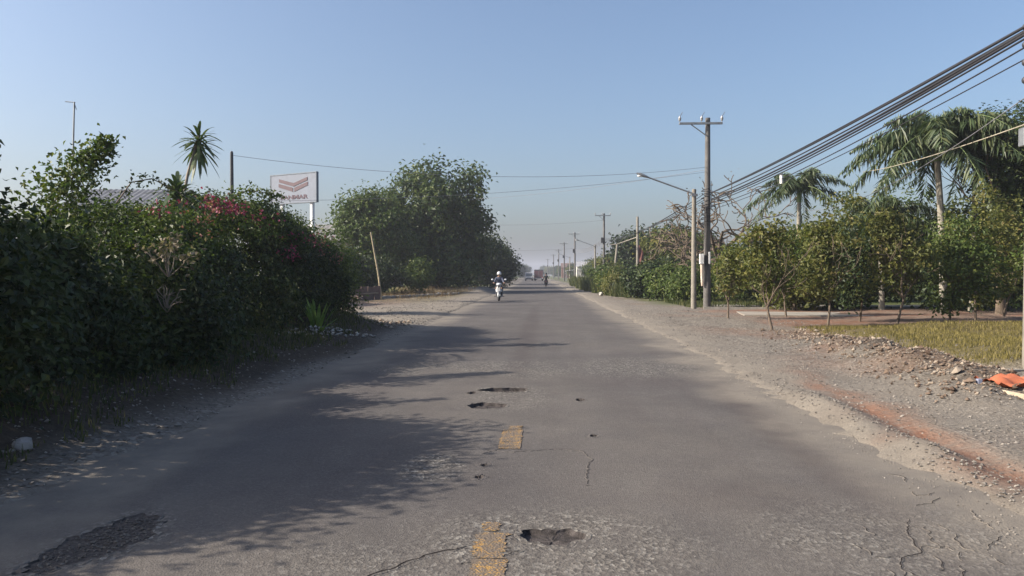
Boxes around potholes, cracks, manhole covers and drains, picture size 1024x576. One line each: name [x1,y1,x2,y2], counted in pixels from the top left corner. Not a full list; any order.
pothole [12,511,168,576]
pothole [464,402,510,410]
crack [482,449,594,486]
pothole [514,527,592,548]
crack [363,546,526,576]
crack [853,474,1006,576]
